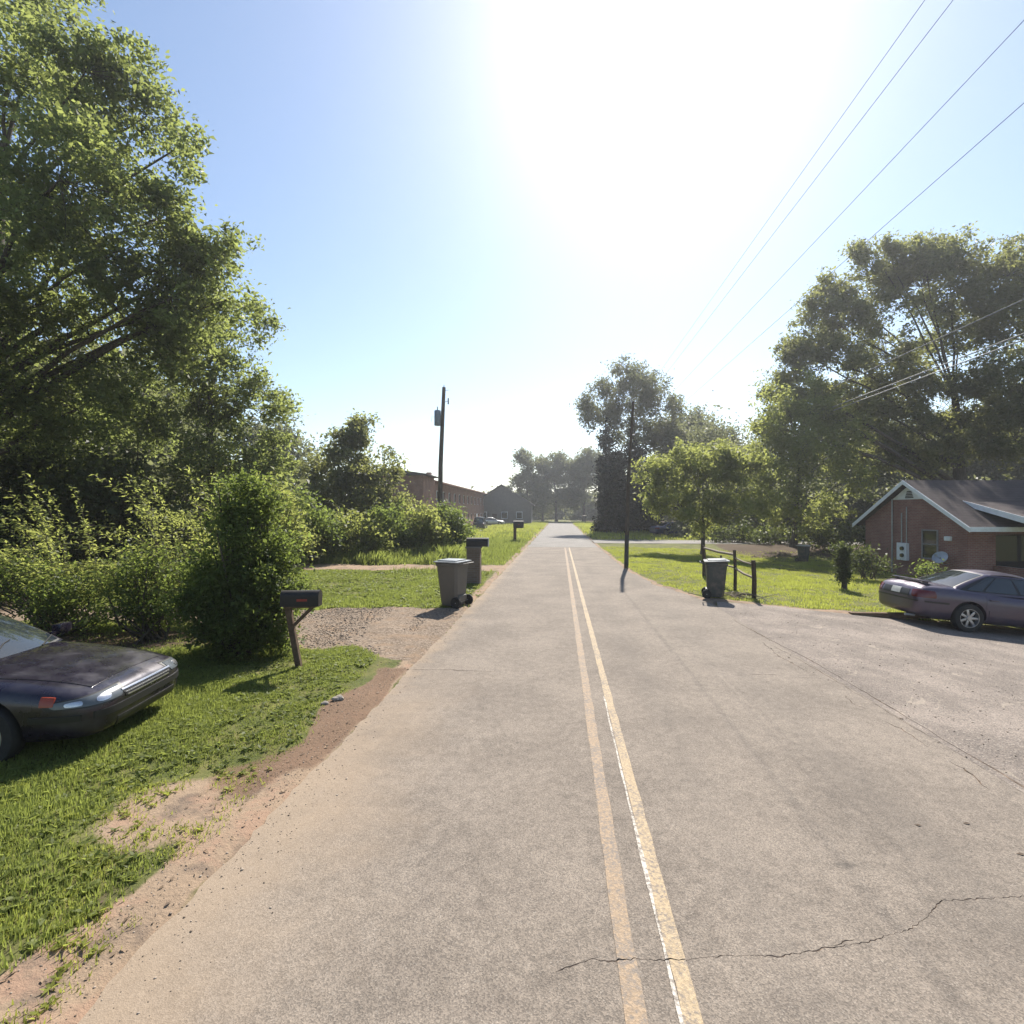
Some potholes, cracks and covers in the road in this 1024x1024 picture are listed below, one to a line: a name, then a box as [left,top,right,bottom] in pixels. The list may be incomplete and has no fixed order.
crack [732,619,1024,789]
crack [556,896,1022,972]
